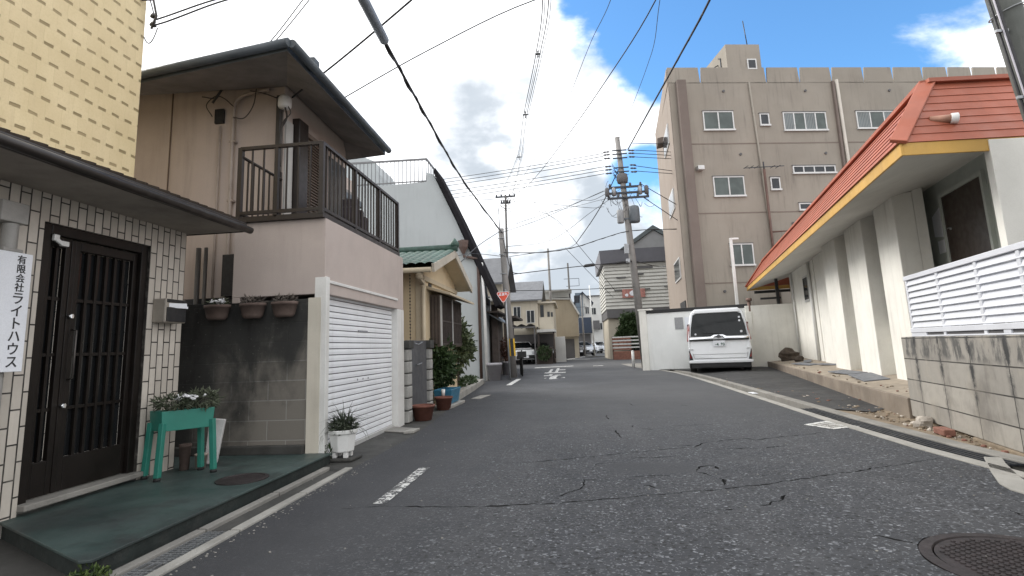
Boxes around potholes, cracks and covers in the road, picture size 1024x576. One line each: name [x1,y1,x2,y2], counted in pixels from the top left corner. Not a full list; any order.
drain grate [121,531,225,576]
manhole cover [214,473,269,486]
manhole cover [918,533,1024,576]
crack [348,415,940,509]
